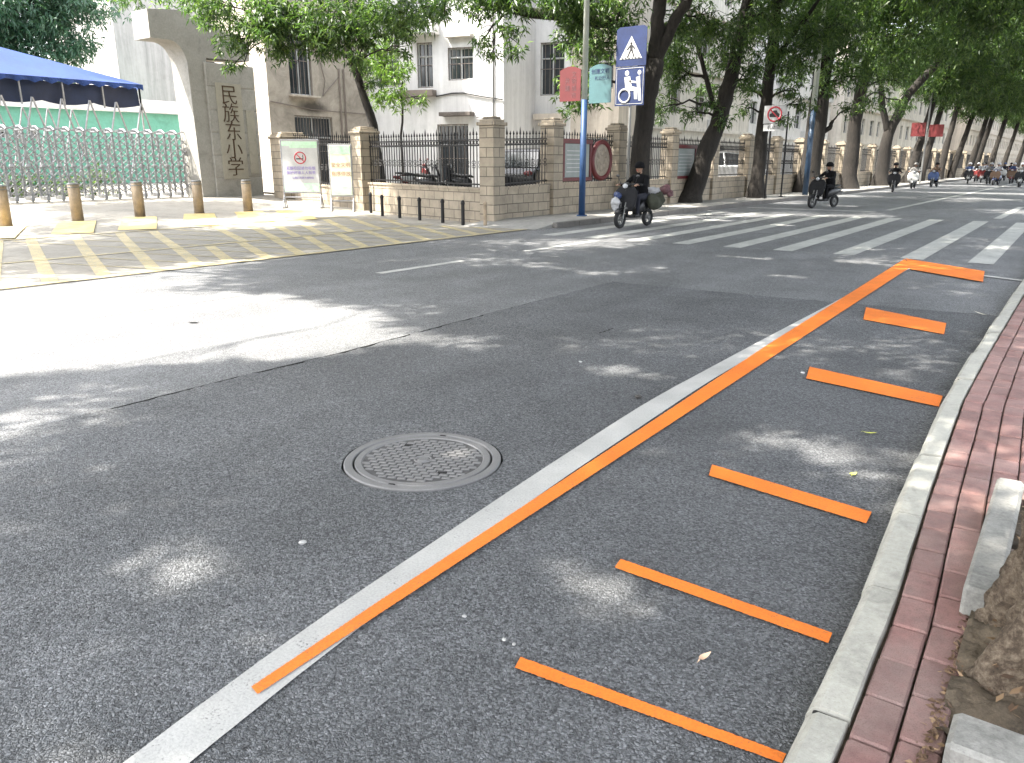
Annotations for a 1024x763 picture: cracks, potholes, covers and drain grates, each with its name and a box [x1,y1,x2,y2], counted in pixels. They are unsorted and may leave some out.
manhole cover [342,432,502,492]
